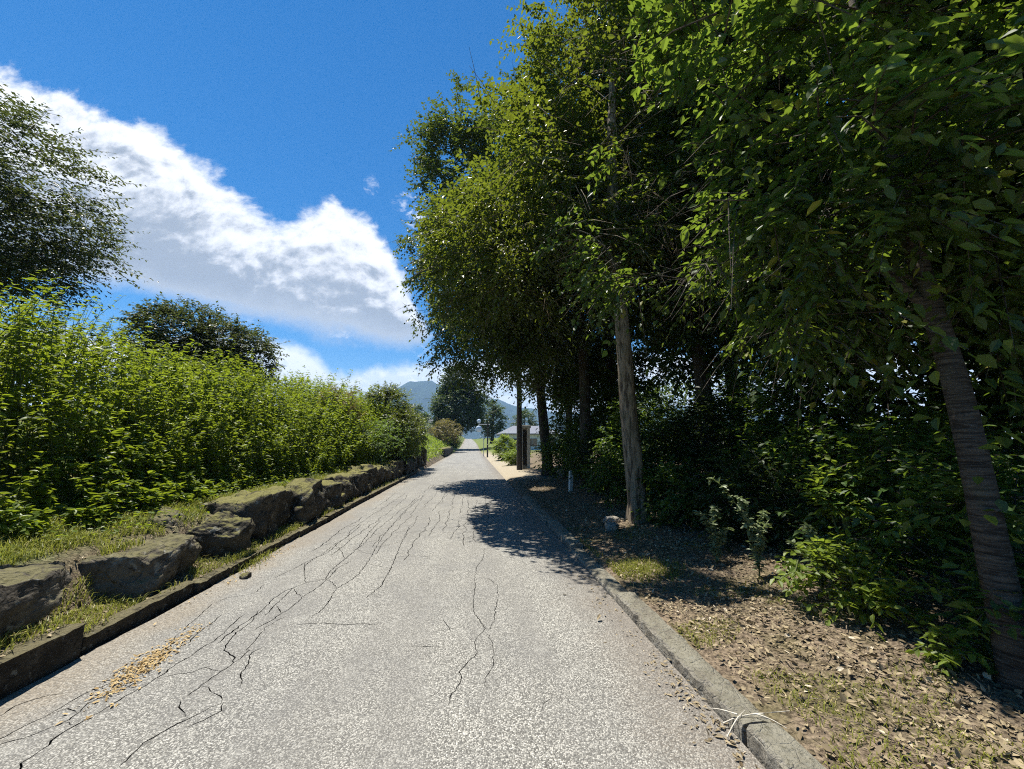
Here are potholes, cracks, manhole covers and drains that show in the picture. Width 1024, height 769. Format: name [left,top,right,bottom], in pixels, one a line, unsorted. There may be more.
crack [448,555,499,705]
crack [0,484,490,769]
